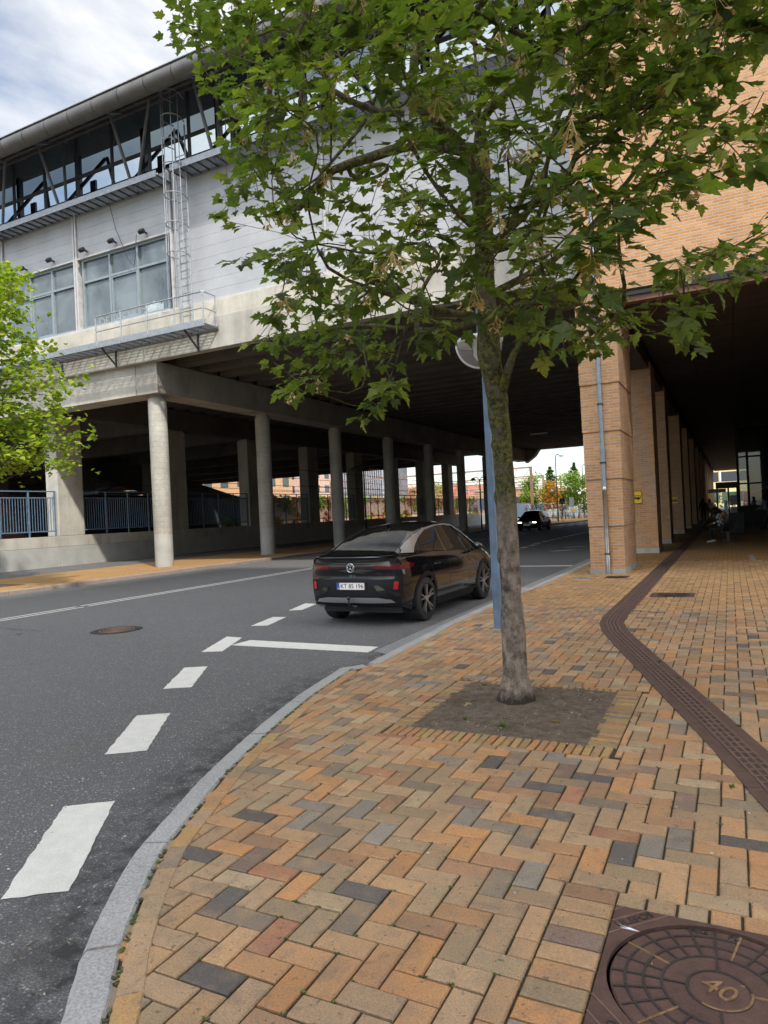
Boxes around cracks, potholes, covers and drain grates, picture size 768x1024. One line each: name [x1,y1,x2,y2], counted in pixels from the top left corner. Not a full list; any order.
manhole cover [91,626,142,634]
manhole cover [583,905,768,1024]
